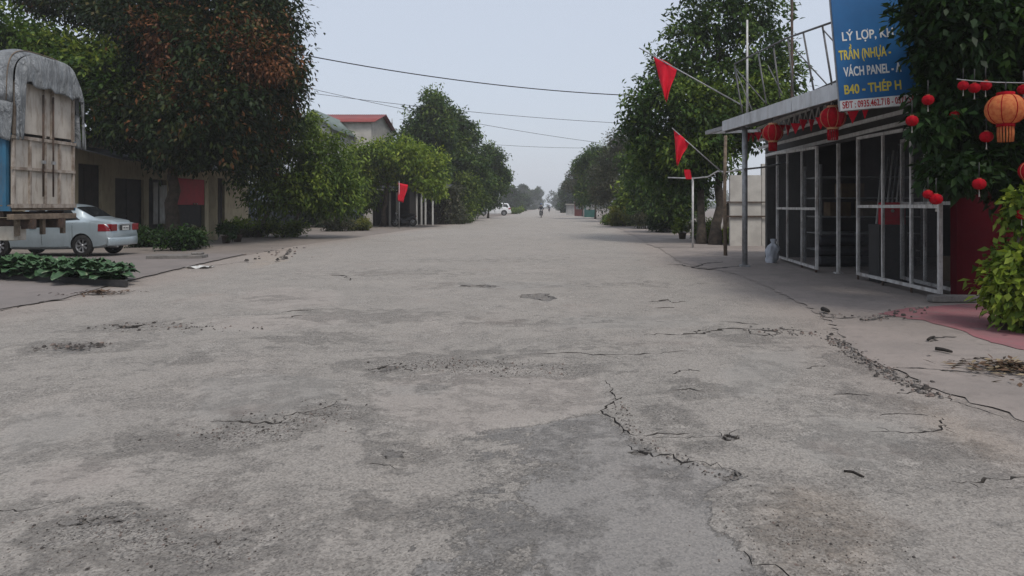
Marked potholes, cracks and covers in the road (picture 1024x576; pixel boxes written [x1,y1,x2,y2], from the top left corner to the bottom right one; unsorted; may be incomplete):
crack [543,322,806,358]
pothole [518,293,558,302]
crack [600,381,740,477]
crack [834,339,1022,435]
crack [211,401,338,424]
pothole [52,343,104,353]
